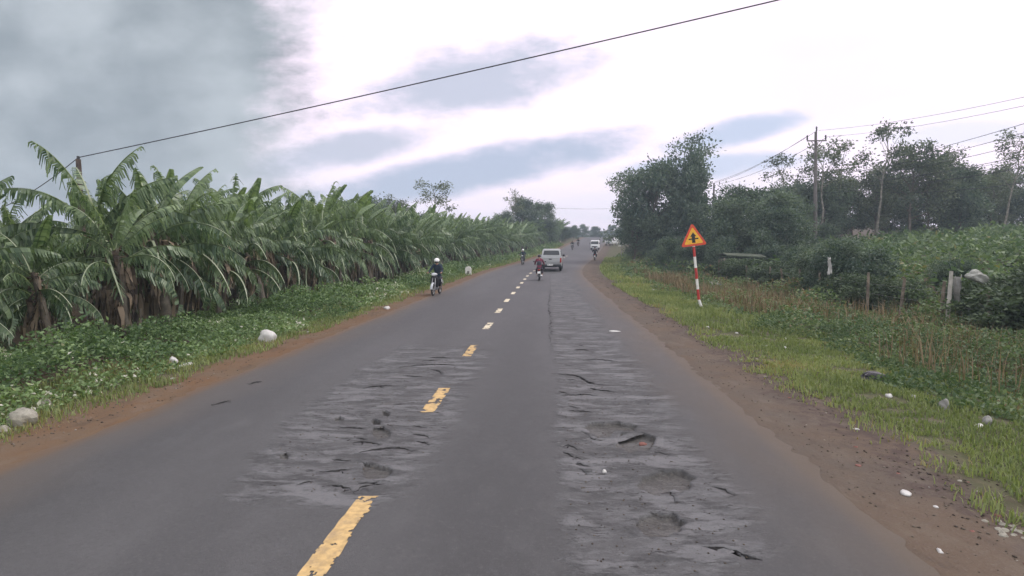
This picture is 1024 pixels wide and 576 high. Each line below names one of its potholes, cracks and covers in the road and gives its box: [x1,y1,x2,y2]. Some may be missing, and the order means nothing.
crack [362,357,456,407]
crack [296,425,435,496]
pothole [627,467,705,501]
crack [209,381,263,407]
pothole [352,459,402,483]
crack [551,345,618,476]
pothole [622,507,698,544]
pothole [608,430,664,456]
crack [659,484,740,503]
crack [701,542,763,567]
